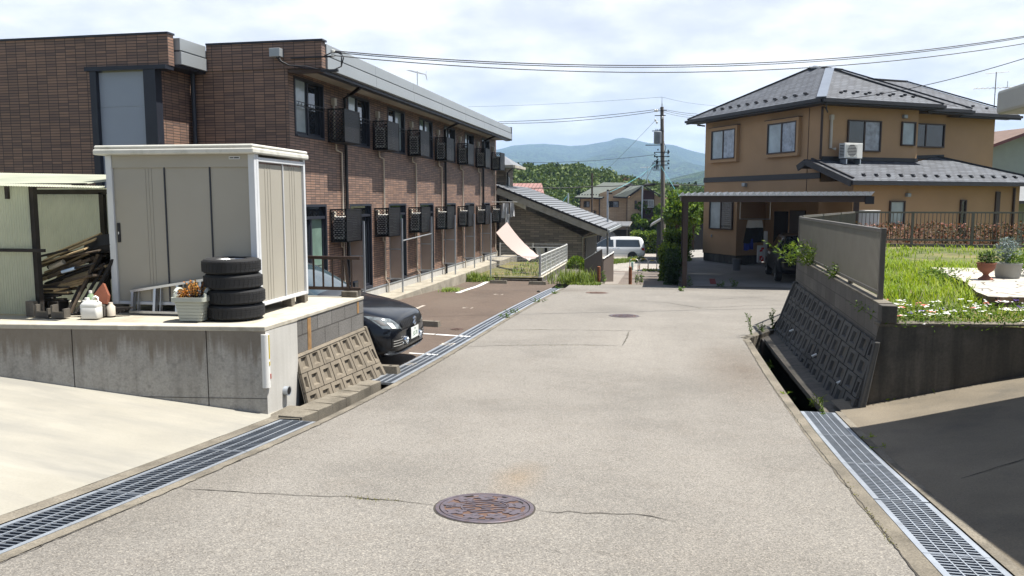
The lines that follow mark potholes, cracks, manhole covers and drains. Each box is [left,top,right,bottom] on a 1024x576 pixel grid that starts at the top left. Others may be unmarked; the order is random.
drain grate [818,434,887,465]
crack [185,488,430,505]
drain grate [922,553,1012,576]
manhole cover [433,493,536,524]
drain grate [800,411,857,436]
drain grate [874,499,991,558]
drain grate [842,463,929,503]
crack [539,510,676,522]
